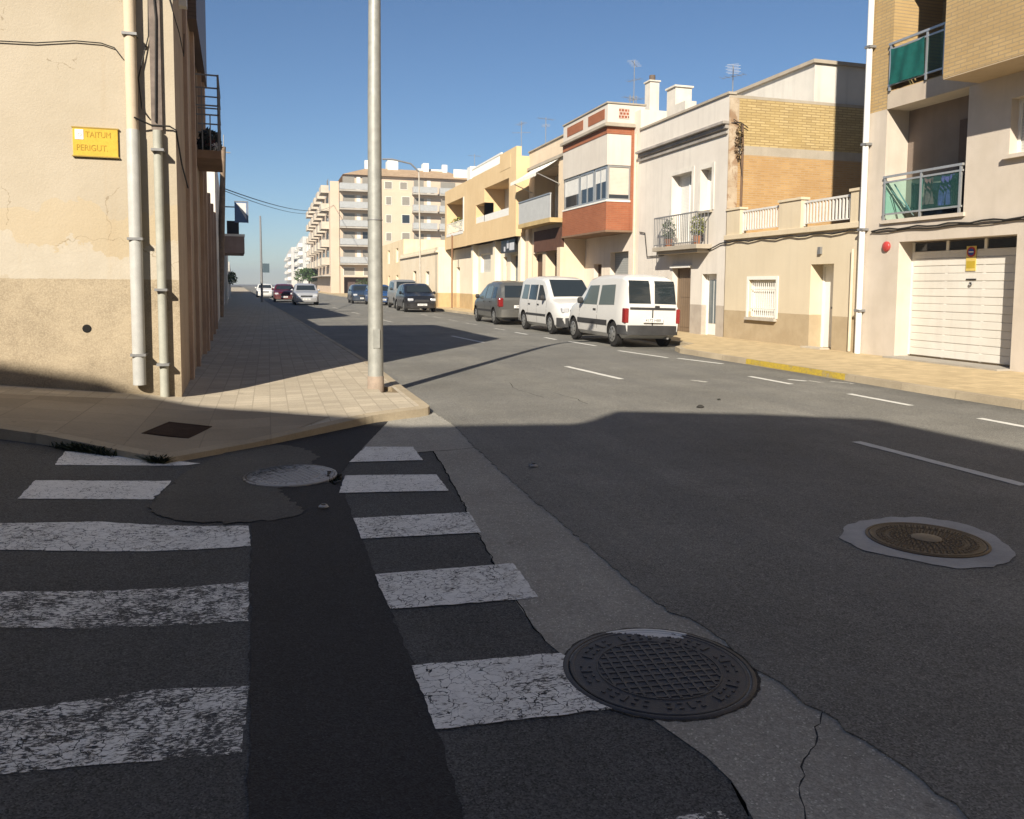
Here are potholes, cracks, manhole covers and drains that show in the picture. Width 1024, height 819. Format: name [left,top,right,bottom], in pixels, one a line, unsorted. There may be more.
manhole cover [563,629,757,720]
manhole cover [865,522,992,558]
manhole cover [243,465,337,487]
utility cover [142,422,212,438]
